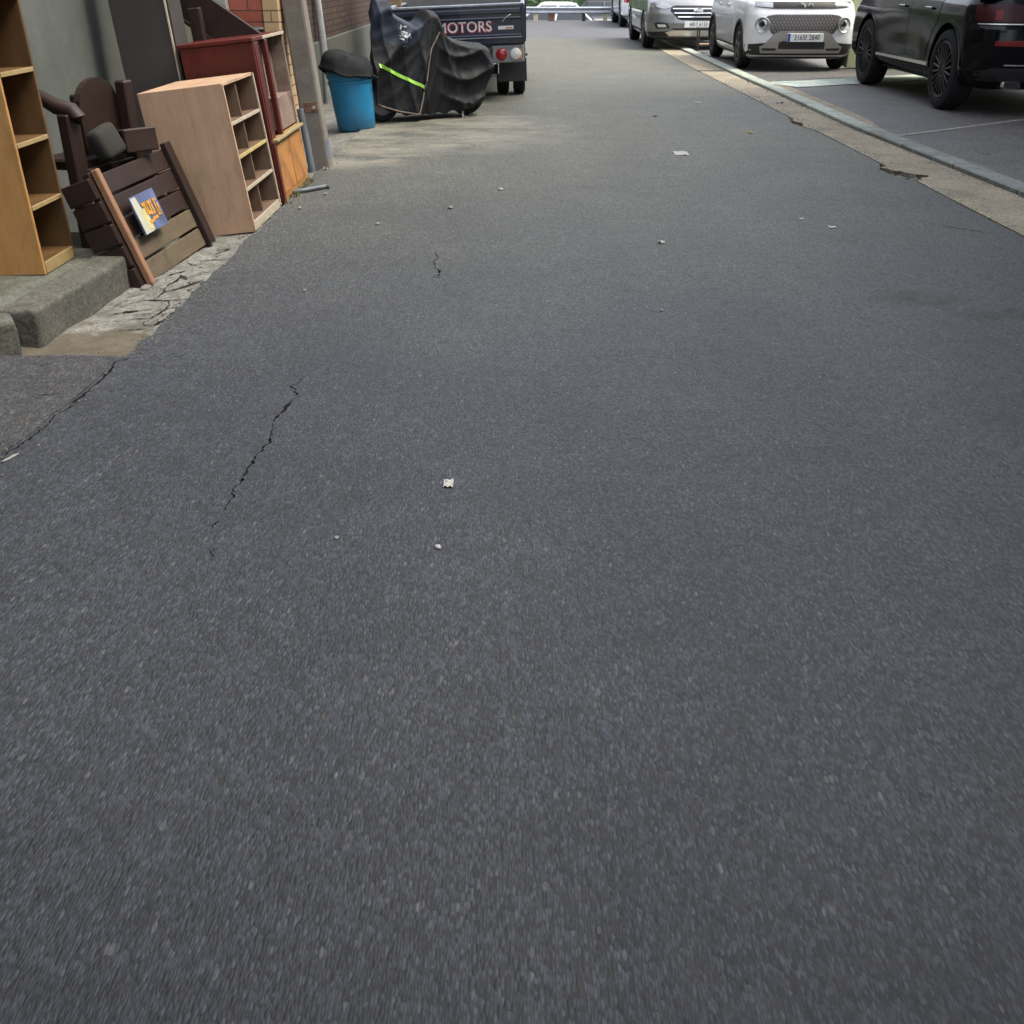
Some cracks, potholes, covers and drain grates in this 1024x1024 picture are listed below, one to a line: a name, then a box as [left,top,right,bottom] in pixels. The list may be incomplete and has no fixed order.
crack [103,248,230,331]
crack [205,377,303,559]
